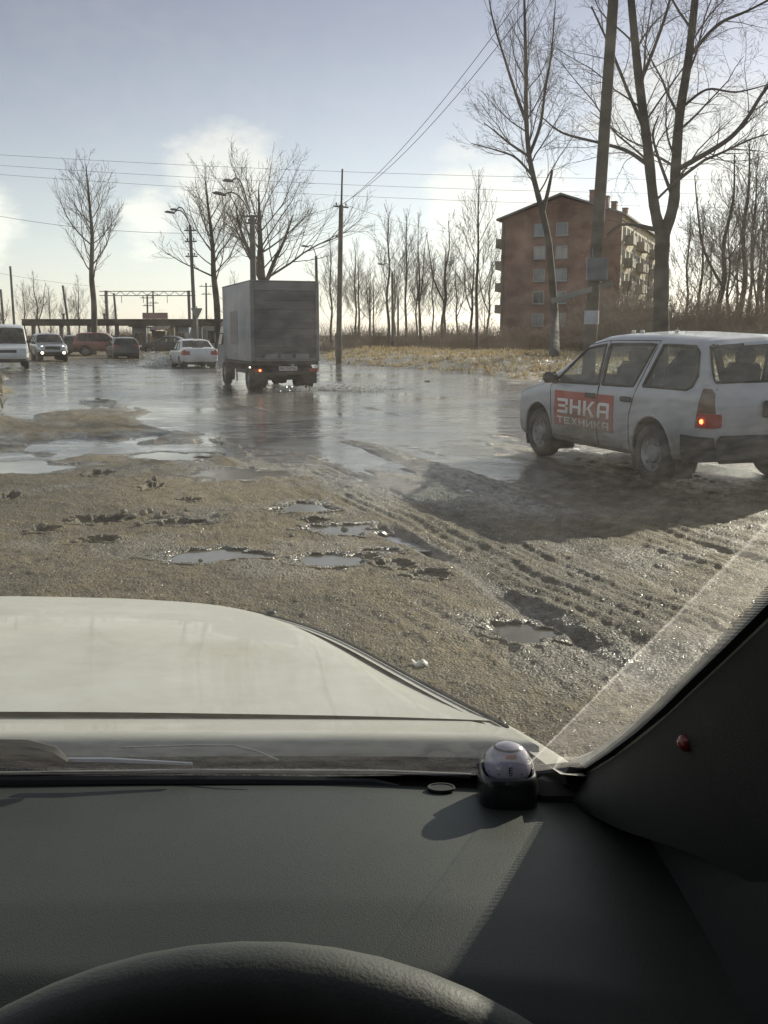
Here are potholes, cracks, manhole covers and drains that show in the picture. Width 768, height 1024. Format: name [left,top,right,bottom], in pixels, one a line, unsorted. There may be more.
pothole [0,459,116,475]
pothole [475,617,575,647]
pothole [21,524,65,534]
pothole [62,513,130,526]
pothole [262,499,349,514]
pothole [131,543,286,566]
pothole [279,548,399,570]
pothole [81,533,124,544]
pothole [286,519,391,538]
